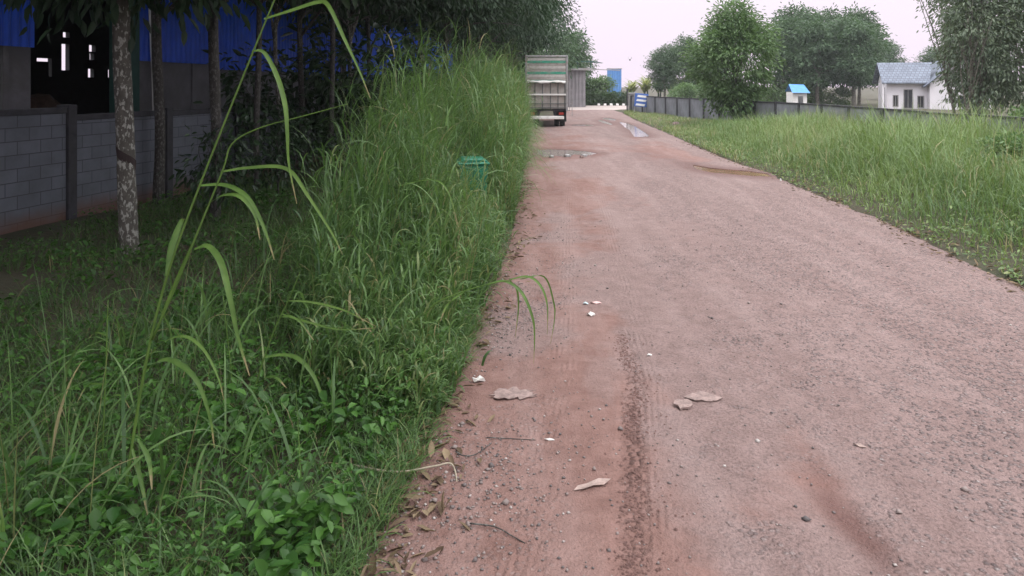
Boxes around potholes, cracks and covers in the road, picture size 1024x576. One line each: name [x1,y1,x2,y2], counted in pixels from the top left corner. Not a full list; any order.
pothole [693,165,771,176]
pothole [620,122,649,137]
pothole [536,149,598,157]
